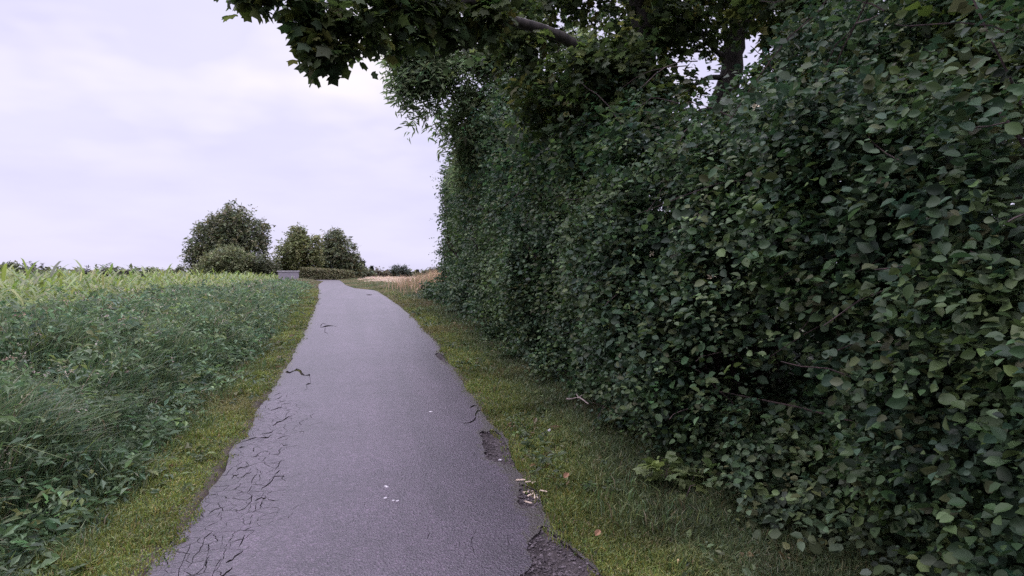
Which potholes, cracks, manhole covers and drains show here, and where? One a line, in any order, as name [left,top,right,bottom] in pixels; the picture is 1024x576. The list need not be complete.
pothole [479,430,515,468]
pothole [520,526,602,576]
crack [154,393,314,576]
